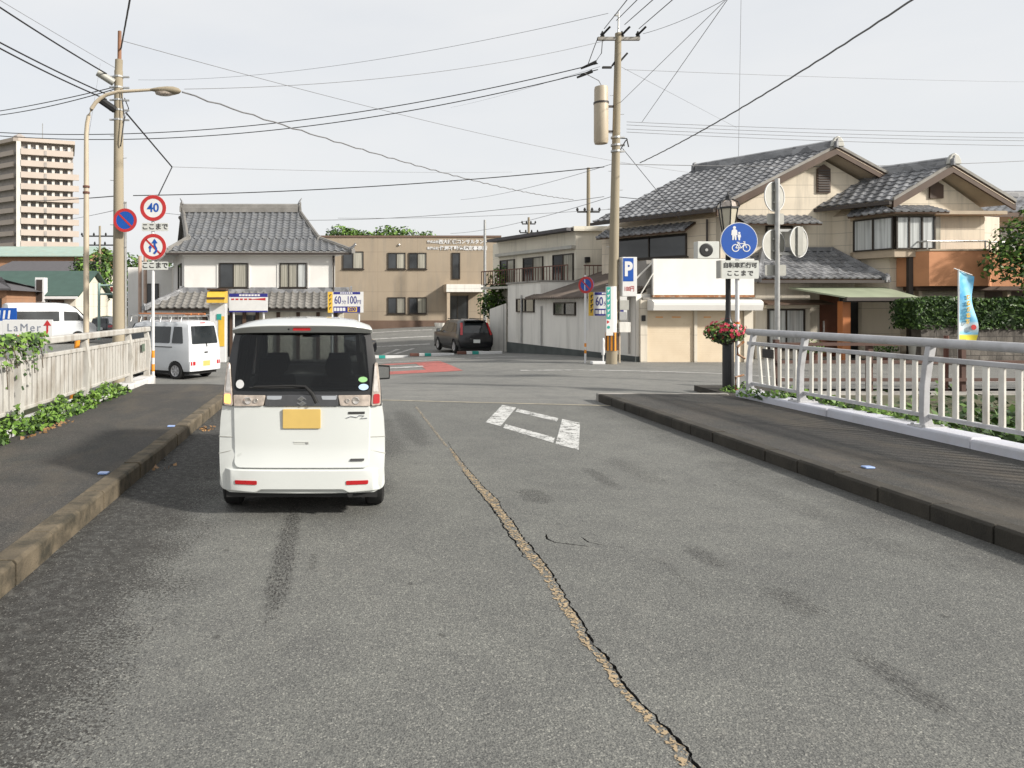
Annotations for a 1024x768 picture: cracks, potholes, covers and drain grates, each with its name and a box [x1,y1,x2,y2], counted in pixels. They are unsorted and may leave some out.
crack [448,442,701,768]
